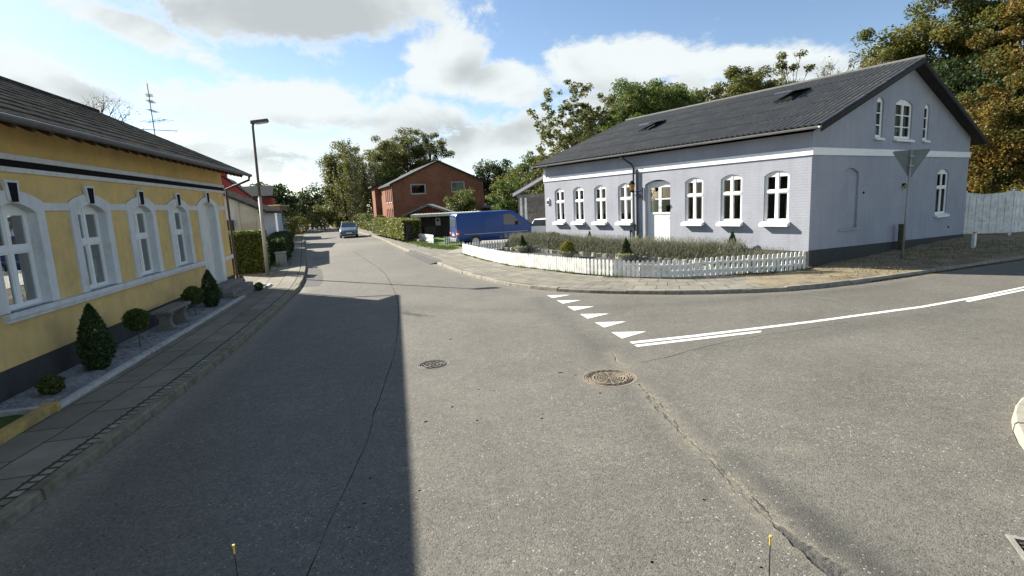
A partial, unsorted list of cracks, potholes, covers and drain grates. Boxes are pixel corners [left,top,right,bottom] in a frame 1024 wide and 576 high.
manhole cover [582,369,638,387]
manhole cover [417,359,450,369]
